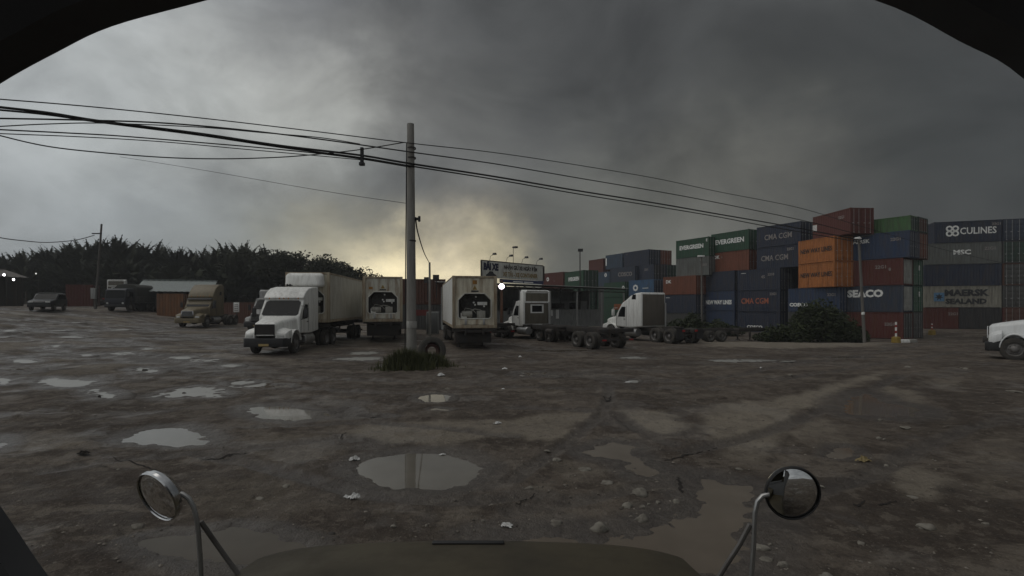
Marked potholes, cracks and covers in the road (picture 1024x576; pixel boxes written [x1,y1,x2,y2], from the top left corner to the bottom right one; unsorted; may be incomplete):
pothole [326,445,514,504]
pothole [220,402,337,427]
pothole [213,378,274,389]
pothole [560,437,690,486]
pothole [407,393,460,404]
pothole [136,384,246,403]
pothole [94,422,236,453]
pothole [22,375,115,391]
